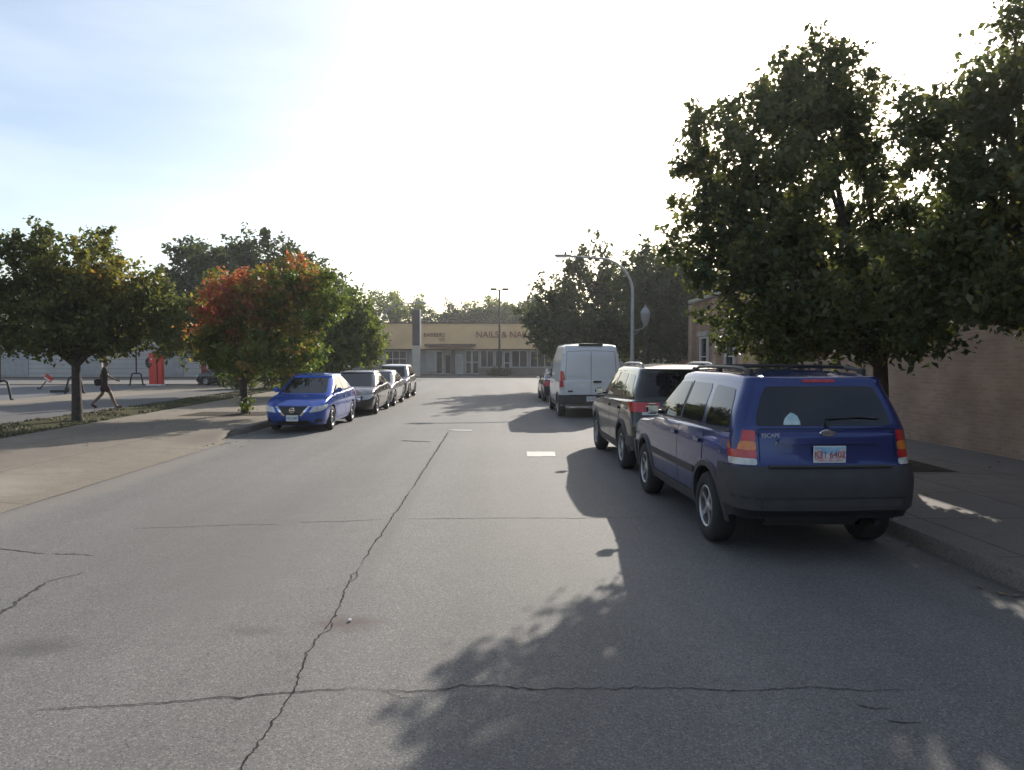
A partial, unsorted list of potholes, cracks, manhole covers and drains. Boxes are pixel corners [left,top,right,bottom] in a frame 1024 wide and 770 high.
crack [26,433,927,770]
crack [0,572,82,614]
